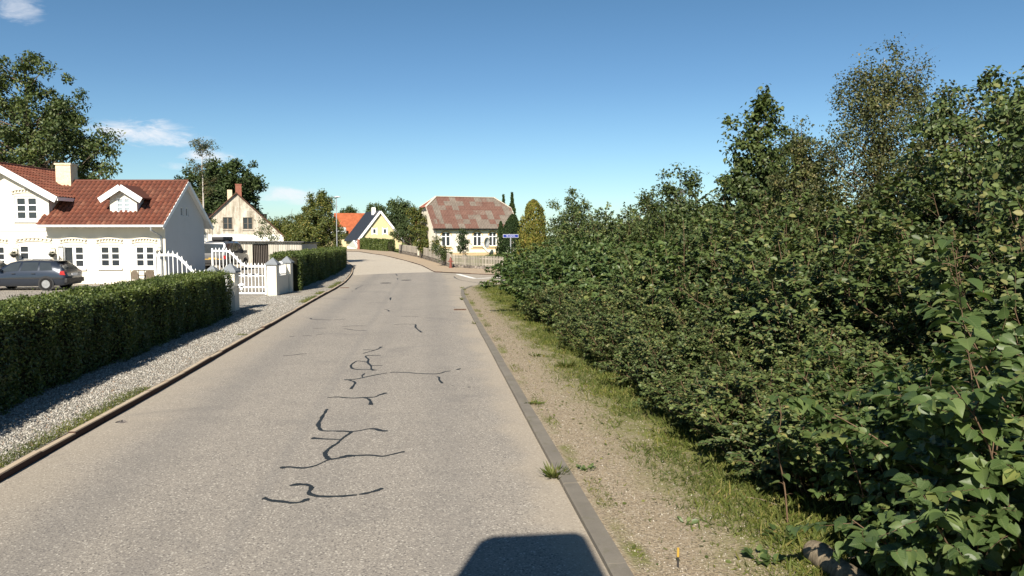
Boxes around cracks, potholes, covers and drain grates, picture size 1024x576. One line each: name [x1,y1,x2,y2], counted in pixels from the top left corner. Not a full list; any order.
crack [344,368,461,389]
